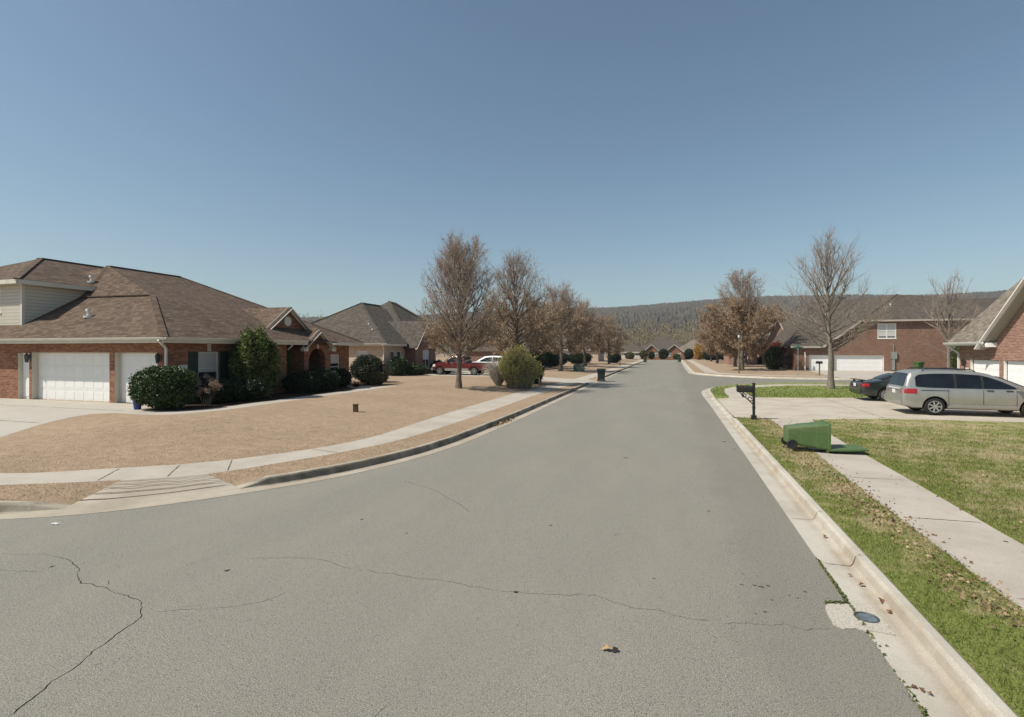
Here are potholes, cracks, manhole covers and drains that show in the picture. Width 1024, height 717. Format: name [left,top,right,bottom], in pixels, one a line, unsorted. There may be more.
crack [0,554,142,716]
crack [369,570,826,630]
